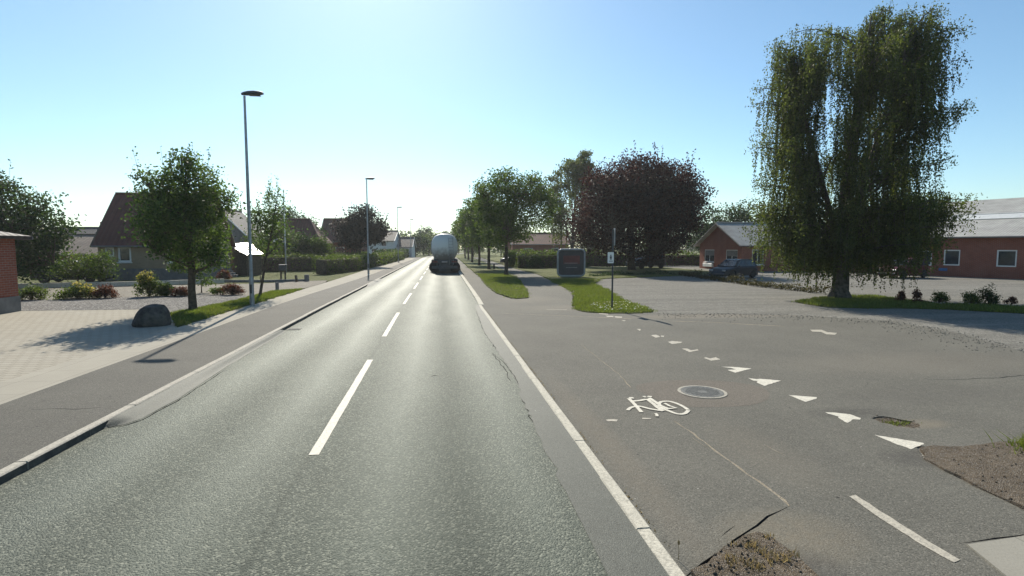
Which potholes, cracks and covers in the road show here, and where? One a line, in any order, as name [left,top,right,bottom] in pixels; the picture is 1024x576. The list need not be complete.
manhole cover [677,385,728,399]
crack [476,312,532,420]
pothole [868,415,922,428]
